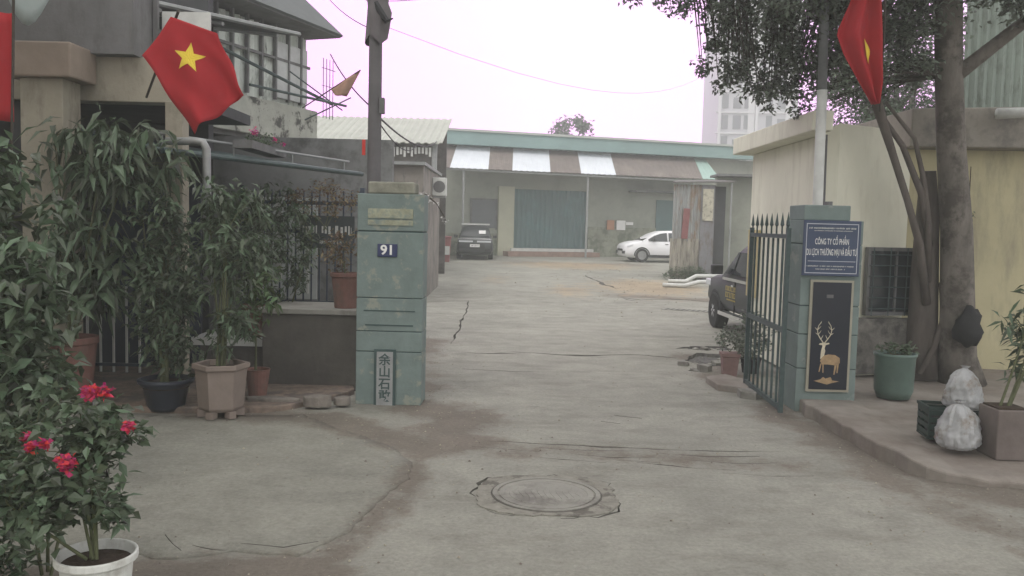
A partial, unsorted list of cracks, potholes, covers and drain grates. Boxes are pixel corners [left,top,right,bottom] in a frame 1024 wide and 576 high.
crack [575,269,706,302]
manhole cover [476,474,619,518]
crack [433,296,469,339]
crack [470,441,770,519]
pothole [685,353,721,366]
